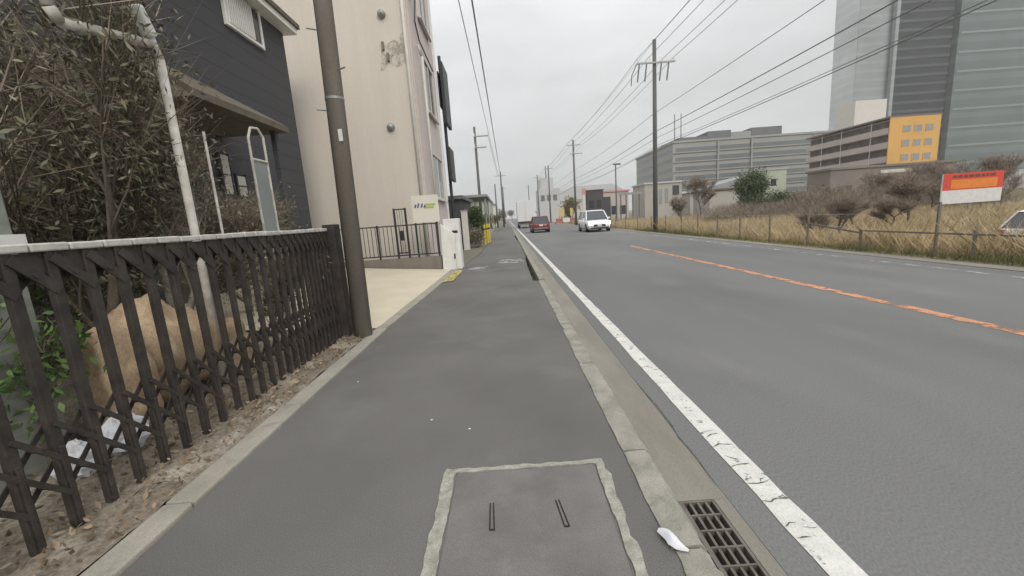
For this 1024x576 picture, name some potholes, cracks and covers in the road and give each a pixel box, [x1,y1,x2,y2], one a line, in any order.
crack [639,385,784,502]
manhole cover [420,458,649,576]
drain grate [678,499,769,576]
